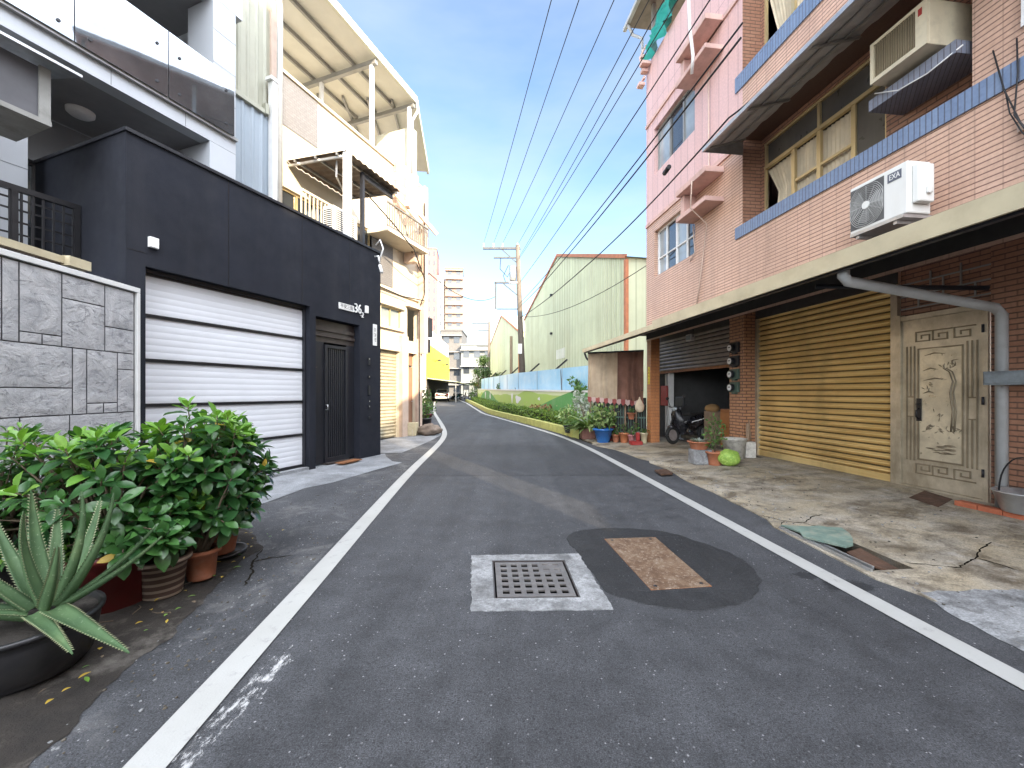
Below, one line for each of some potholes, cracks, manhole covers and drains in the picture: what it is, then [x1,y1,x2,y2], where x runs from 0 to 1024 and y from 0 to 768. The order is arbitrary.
crack [244,549,290,585]
drain grate [470,553,613,612]
crack [912,542,1019,571]
